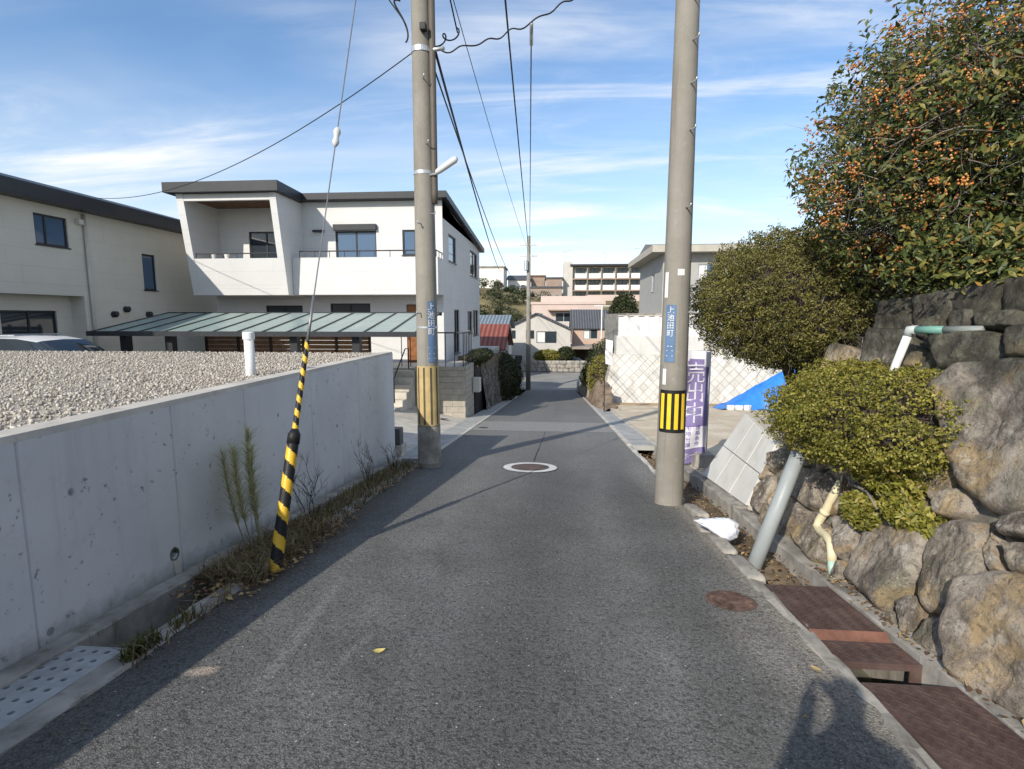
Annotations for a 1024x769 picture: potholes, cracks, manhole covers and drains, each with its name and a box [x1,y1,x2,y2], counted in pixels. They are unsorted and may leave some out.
drain grate [0,645,125,730]
manhole cover [705,590,757,611]
manhole cover [503,462,557,472]
